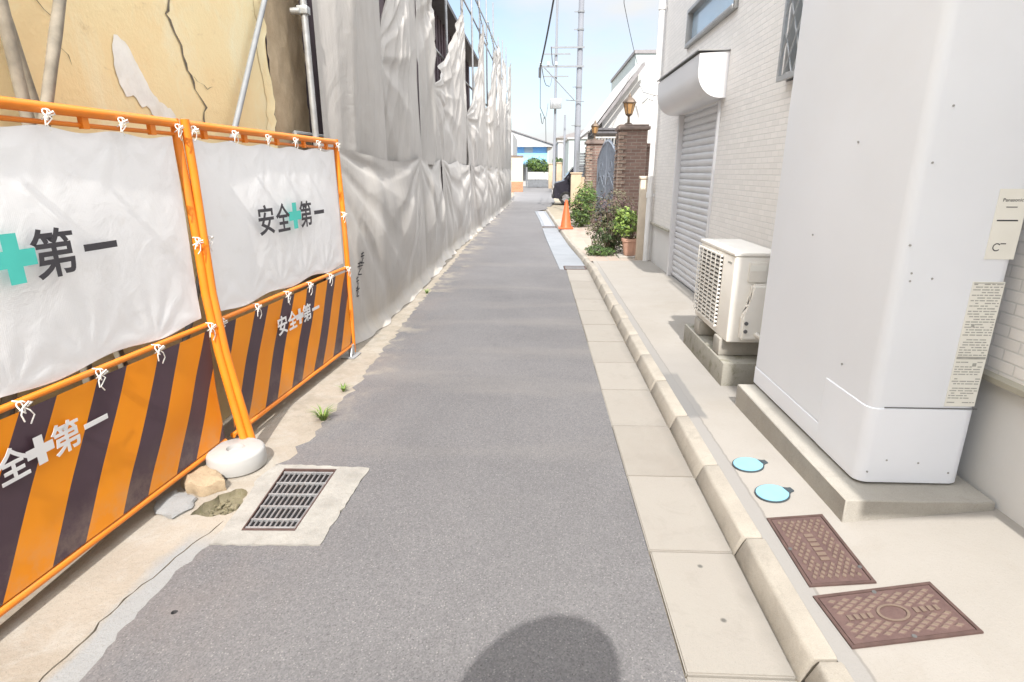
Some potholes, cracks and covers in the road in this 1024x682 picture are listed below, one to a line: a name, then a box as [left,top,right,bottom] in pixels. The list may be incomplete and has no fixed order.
manhole cover [813,581,984,650]
drain grate [209,464,369,546]
manhole cover [767,514,877,588]
utility cover [732,457,768,473]
utility cover [754,484,794,503]
